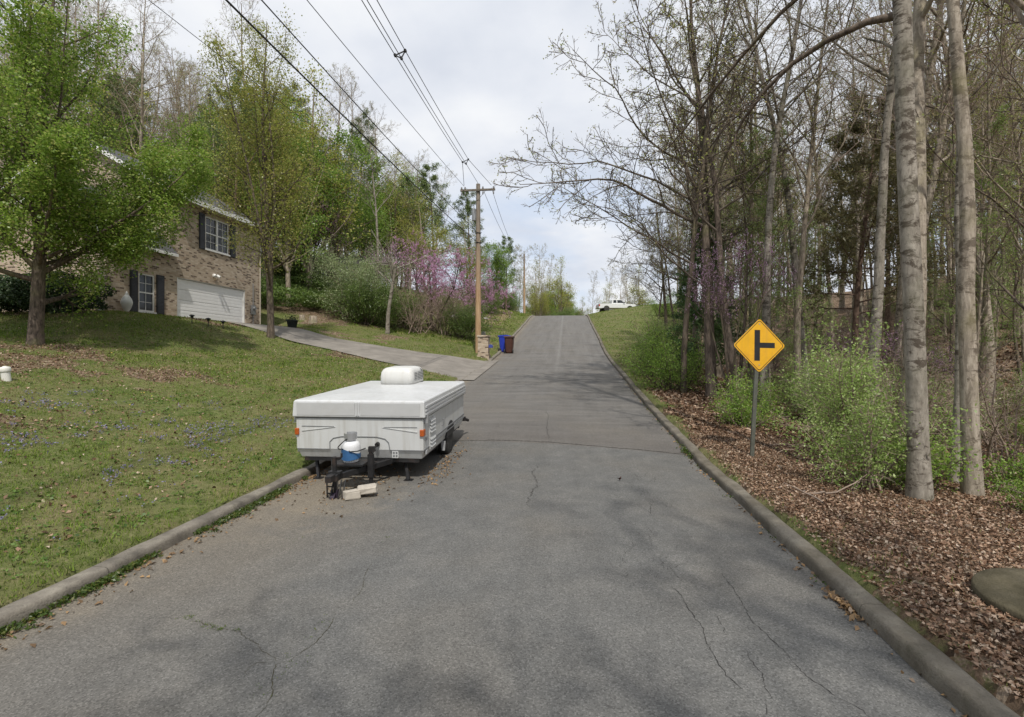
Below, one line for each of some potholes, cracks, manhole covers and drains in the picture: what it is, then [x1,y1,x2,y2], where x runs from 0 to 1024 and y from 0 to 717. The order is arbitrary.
crack [187,564,372,716]
crack [608,474,773,712]
crack [724,577,870,717]
